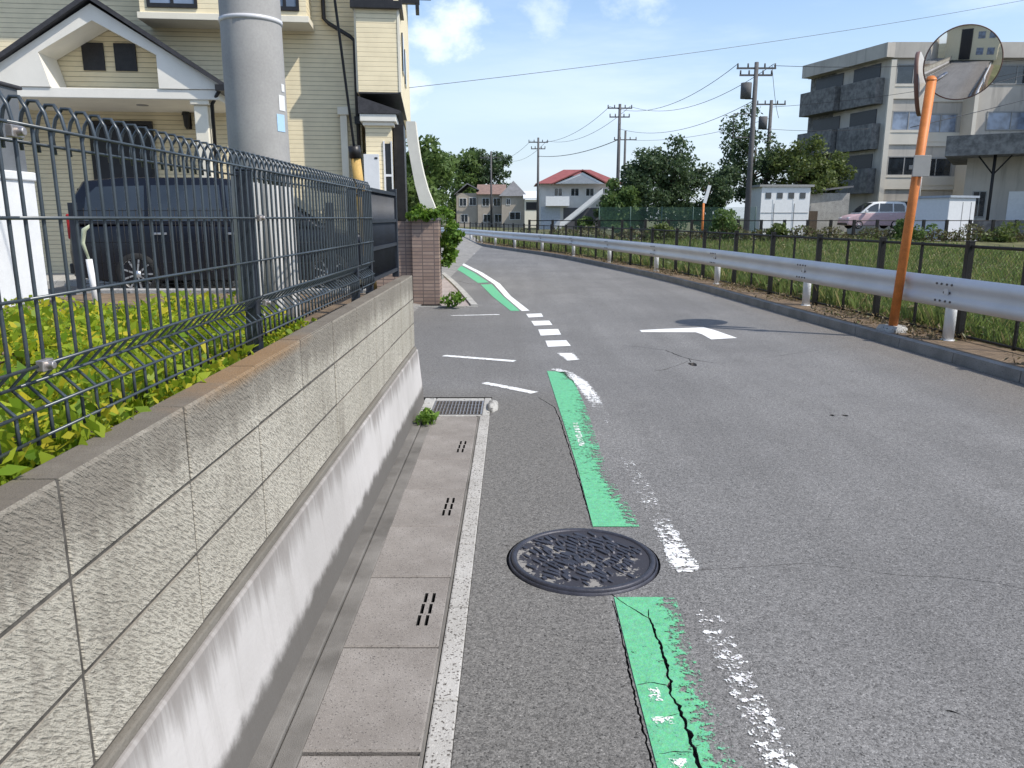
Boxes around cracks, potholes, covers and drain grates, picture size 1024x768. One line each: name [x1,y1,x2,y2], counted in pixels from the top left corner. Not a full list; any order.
drain grate [419,398,491,417]
crack [612,594,701,768]
crack [668,563,1023,589]
manhole cover [506,528,661,597]
